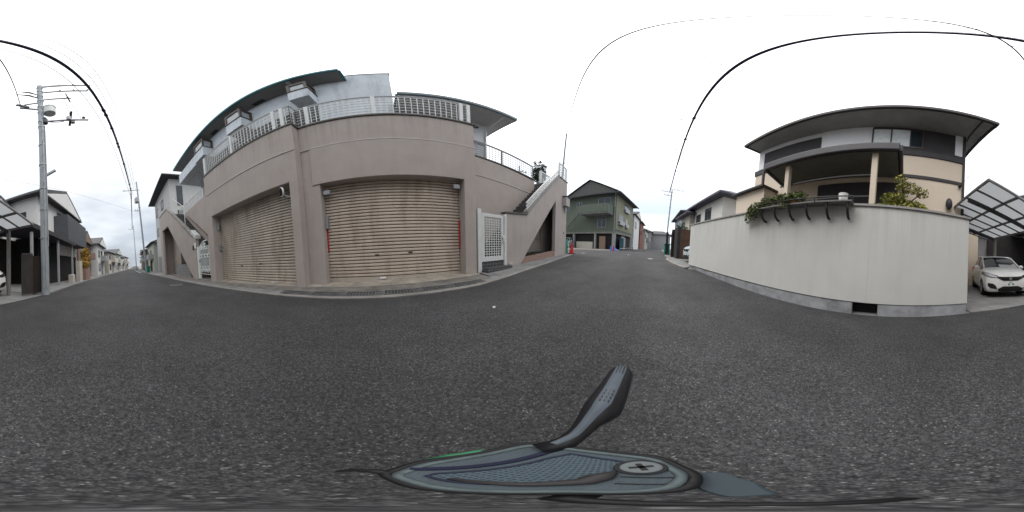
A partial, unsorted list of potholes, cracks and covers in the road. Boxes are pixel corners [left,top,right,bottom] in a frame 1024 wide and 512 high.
drain grate [420,284,457,292]
drain grate [453,279,487,287]
